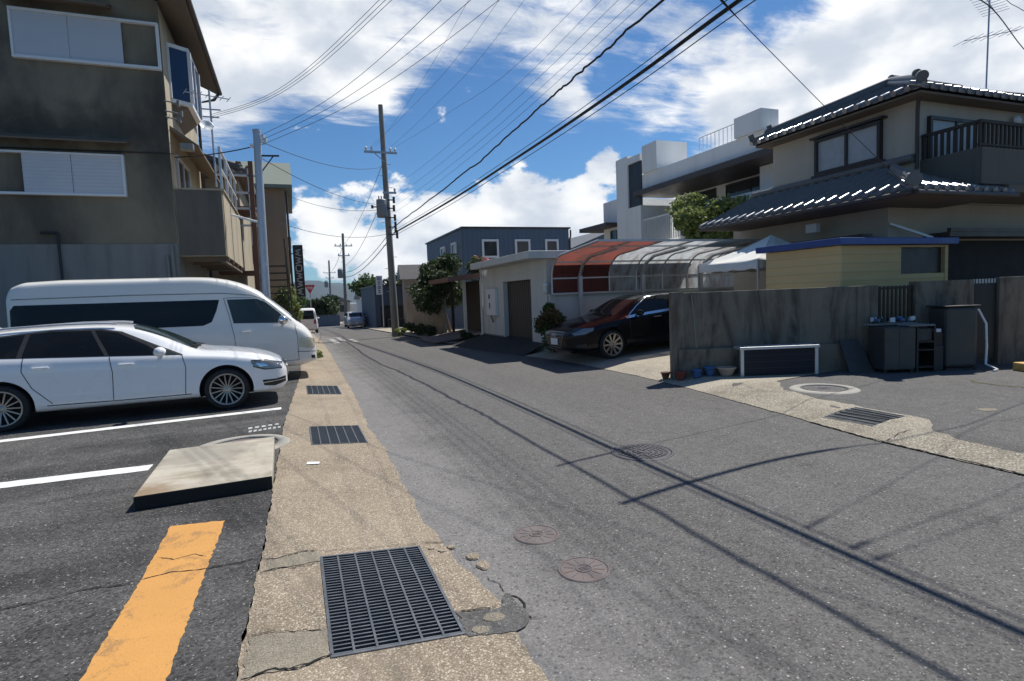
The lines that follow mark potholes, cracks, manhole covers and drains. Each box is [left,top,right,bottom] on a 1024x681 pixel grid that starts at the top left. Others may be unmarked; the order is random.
manhole cover [201,434,290,449]
manhole cover [789,383,861,394]
drain grate [306,386,342,394]
manhole cover [610,443,674,461]
manhole cover [557,557,611,583]
crack [455,576,537,619]
drain grate [823,407,907,427]
drain grate [320,545,467,659]
drain grate [309,425,368,445]
manhole cover [513,525,559,545]
